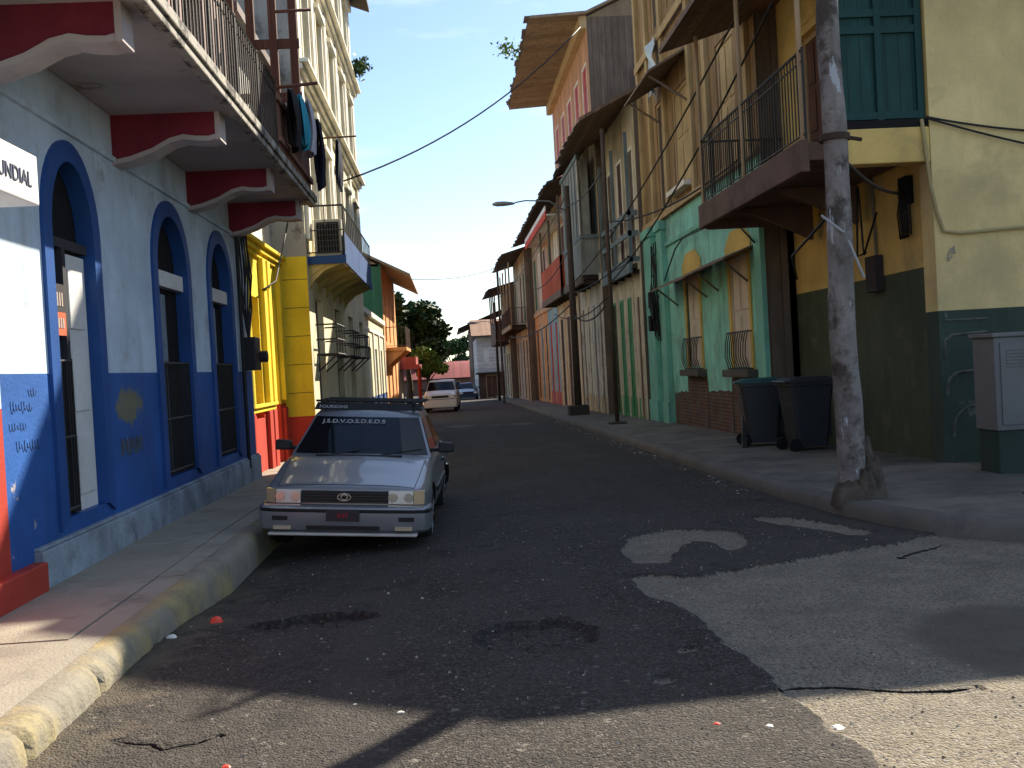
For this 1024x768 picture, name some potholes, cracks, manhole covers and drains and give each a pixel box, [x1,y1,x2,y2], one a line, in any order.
crack [780,685,982,696]
pothole [237,610,387,632]
crack [110,735,220,754]
pothole [466,615,607,654]
crack [898,545,946,559]
